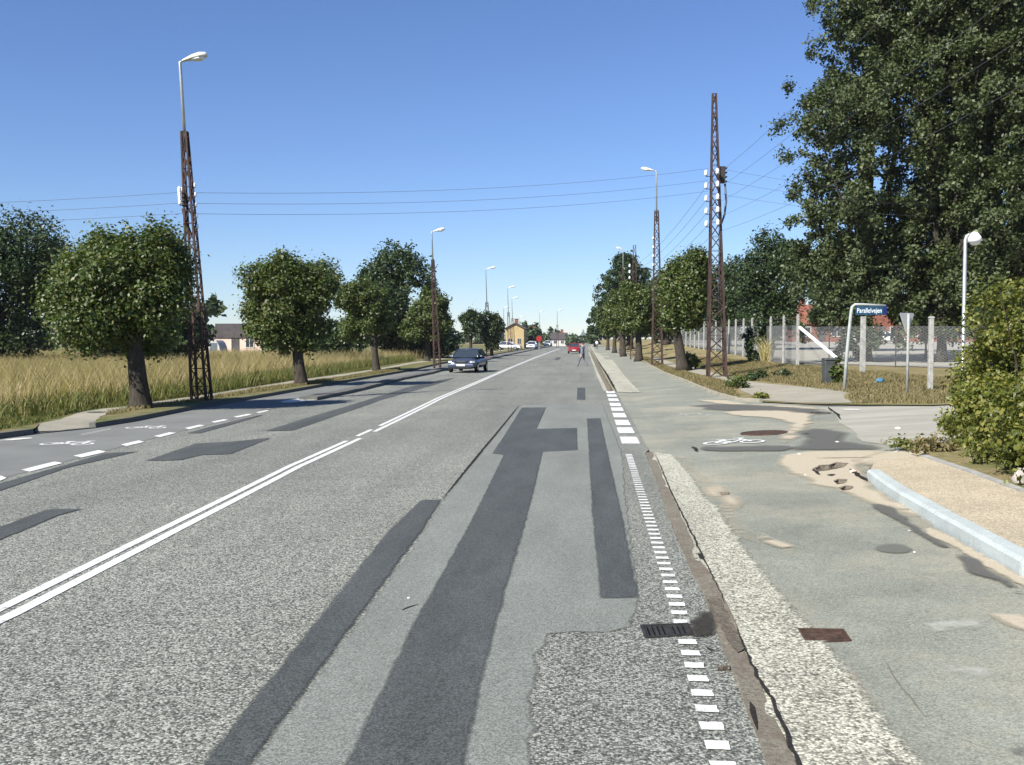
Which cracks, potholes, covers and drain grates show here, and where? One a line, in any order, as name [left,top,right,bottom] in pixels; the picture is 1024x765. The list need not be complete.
manhole cover [797,628,851,642]
pothole [813,462,848,471]
drain grate [640,623,693,639]
